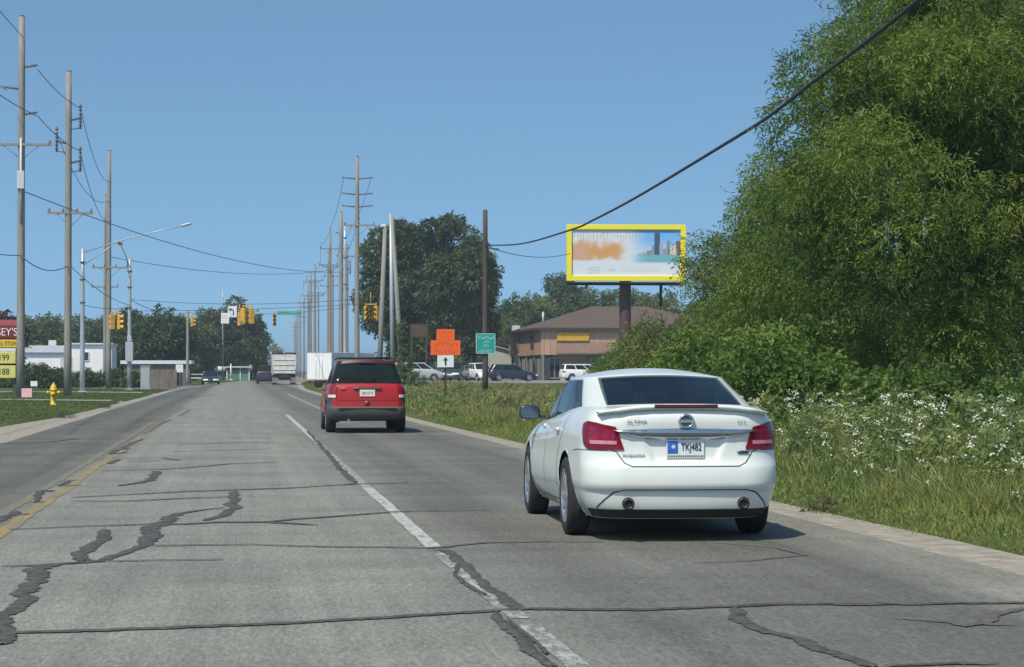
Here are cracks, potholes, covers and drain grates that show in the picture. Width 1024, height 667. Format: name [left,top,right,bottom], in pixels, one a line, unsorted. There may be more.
crack [0,410,1024,667]
